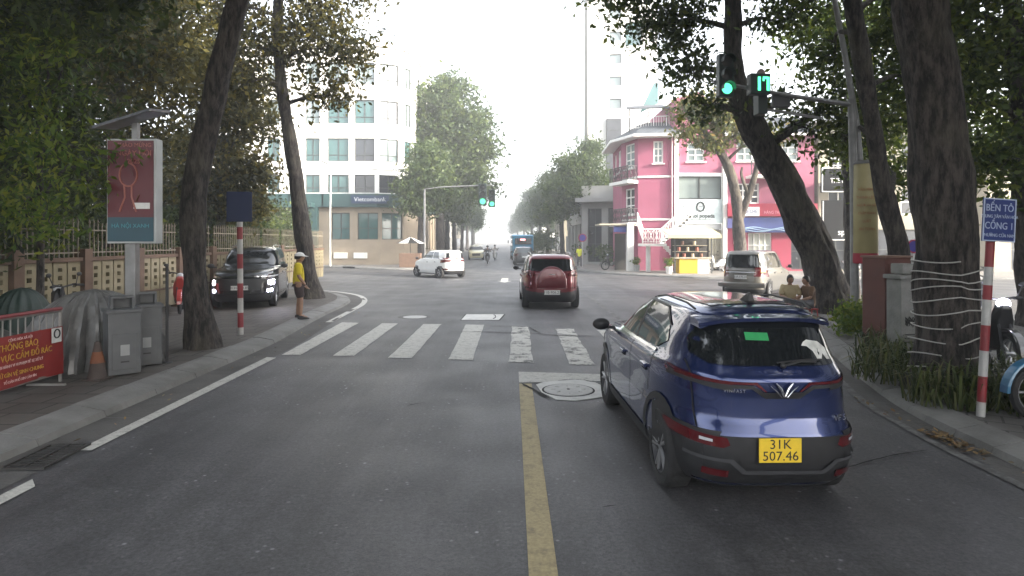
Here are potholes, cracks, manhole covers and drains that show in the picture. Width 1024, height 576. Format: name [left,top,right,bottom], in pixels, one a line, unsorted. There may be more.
manhole cover [536,379,603,401]
crack [849,450,923,467]
drain grate [0,443,91,471]
